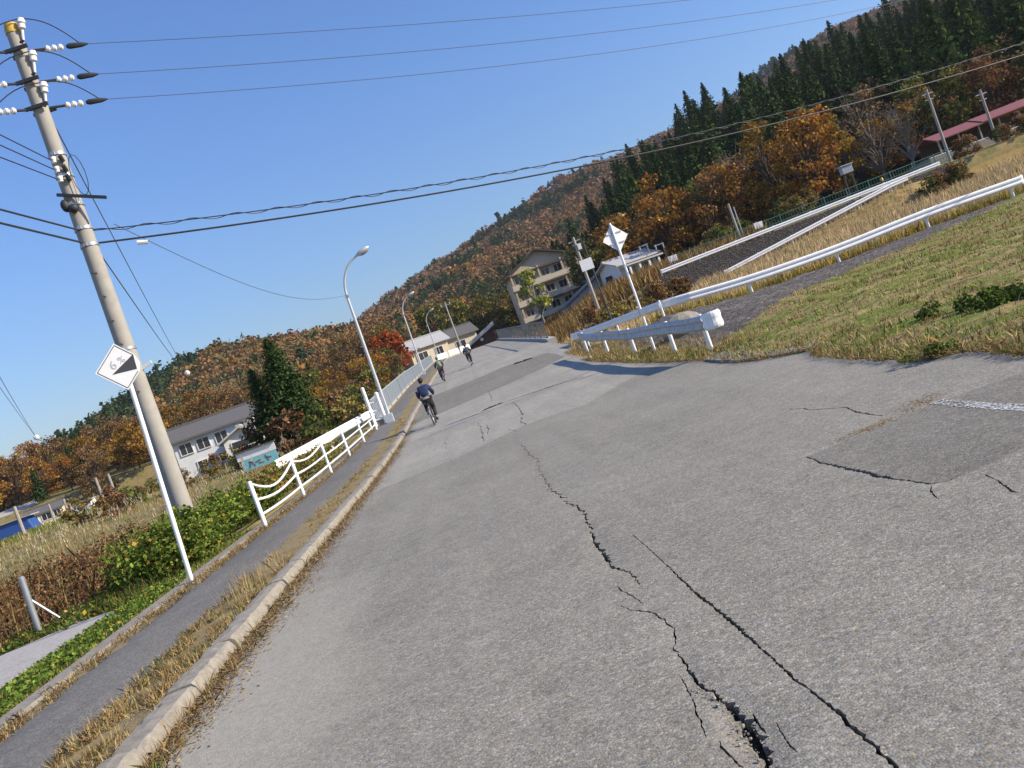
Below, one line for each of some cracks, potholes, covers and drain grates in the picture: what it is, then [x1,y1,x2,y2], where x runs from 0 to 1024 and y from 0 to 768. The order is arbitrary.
crack [800,407,882,416]
crack [807,457,958,499]
crack [985,474,1019,493]
crack [508,376,798,768]
